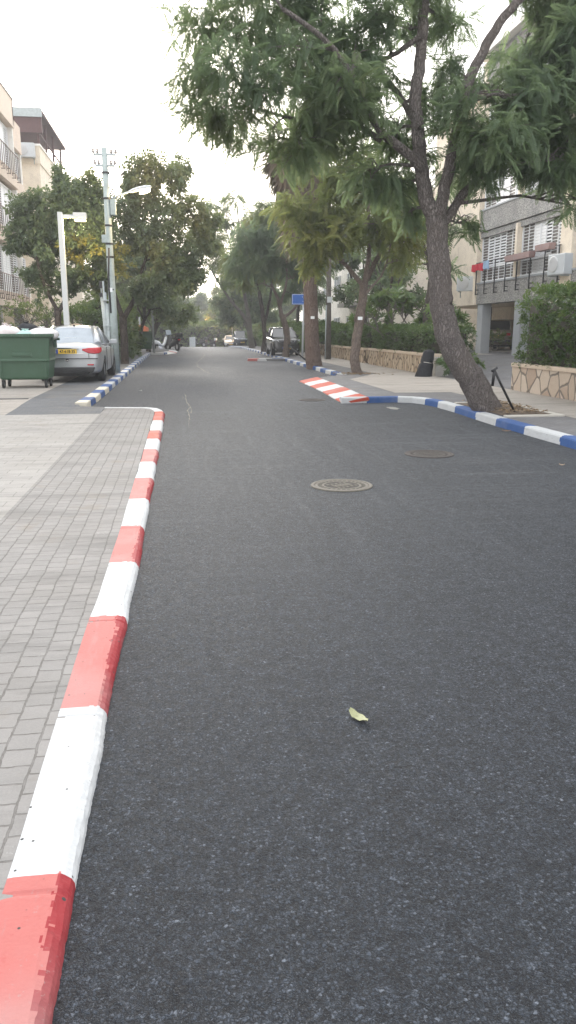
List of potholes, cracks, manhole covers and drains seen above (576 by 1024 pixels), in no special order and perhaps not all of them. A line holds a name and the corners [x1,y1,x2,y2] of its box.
manhole cover [311,479,373,492]
manhole cover [404,450,454,458]
